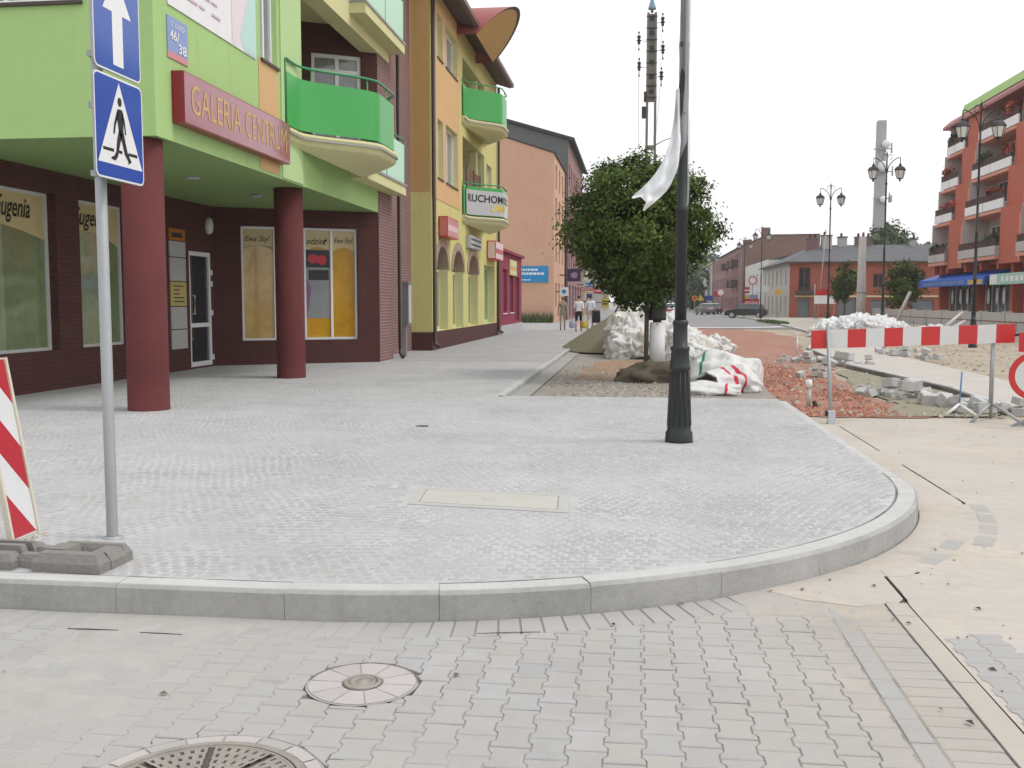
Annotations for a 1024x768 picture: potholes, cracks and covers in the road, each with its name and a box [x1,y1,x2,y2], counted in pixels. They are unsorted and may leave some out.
manhole cover [407,487,569,513]
manhole cover [305,663,419,706]
